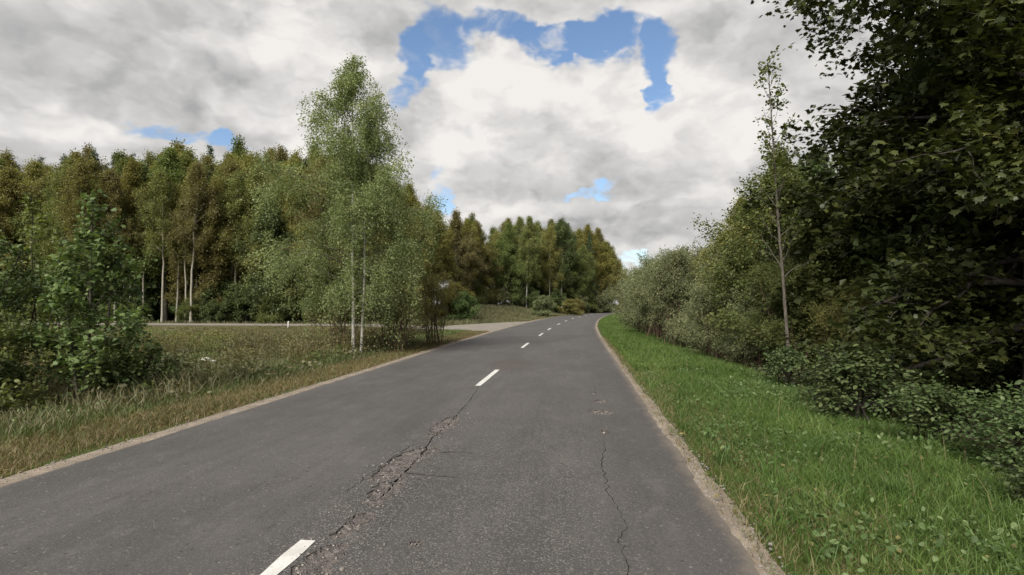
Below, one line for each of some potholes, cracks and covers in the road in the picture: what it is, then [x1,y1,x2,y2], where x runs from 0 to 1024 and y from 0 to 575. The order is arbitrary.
crack [288,388,478,575]
crack [593,380,629,575]
